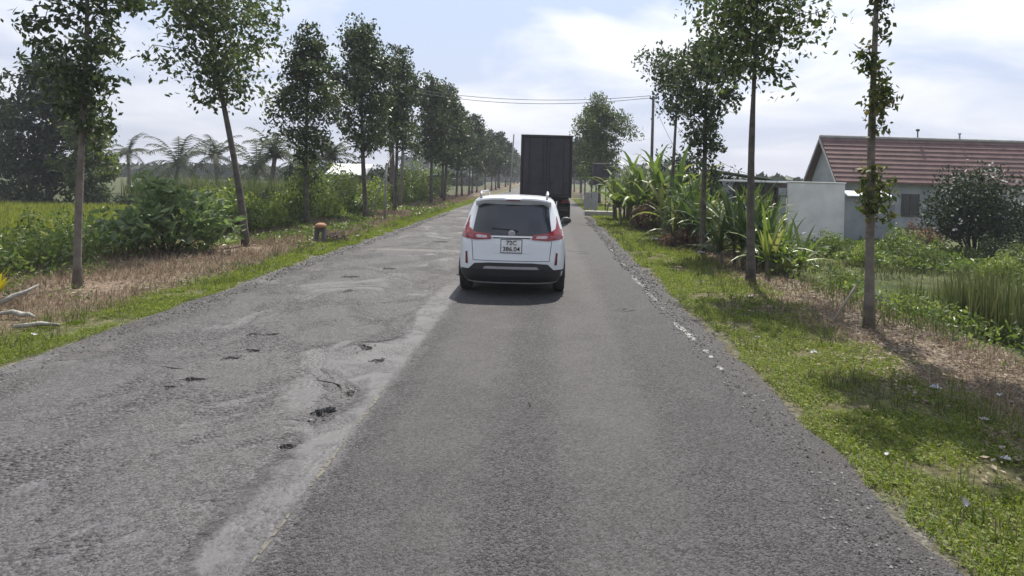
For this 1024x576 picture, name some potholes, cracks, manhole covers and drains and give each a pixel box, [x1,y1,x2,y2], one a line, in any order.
pothole [310,407,337,417]
